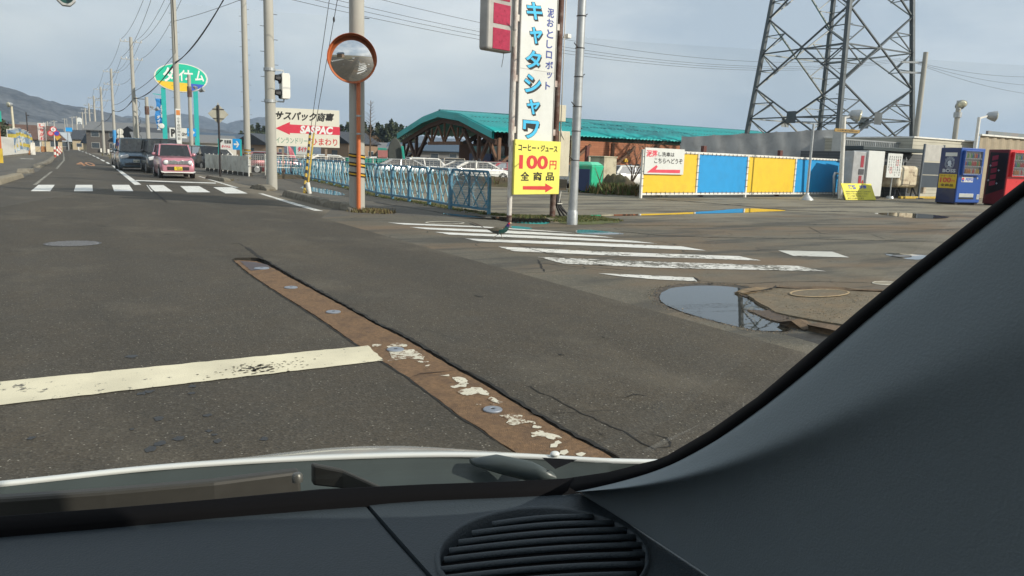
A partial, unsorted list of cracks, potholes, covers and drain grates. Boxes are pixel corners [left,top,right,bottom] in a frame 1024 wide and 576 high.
pothole [653,283,796,333]
crack [523,386,672,449]
manhole cover [789,289,850,297]
